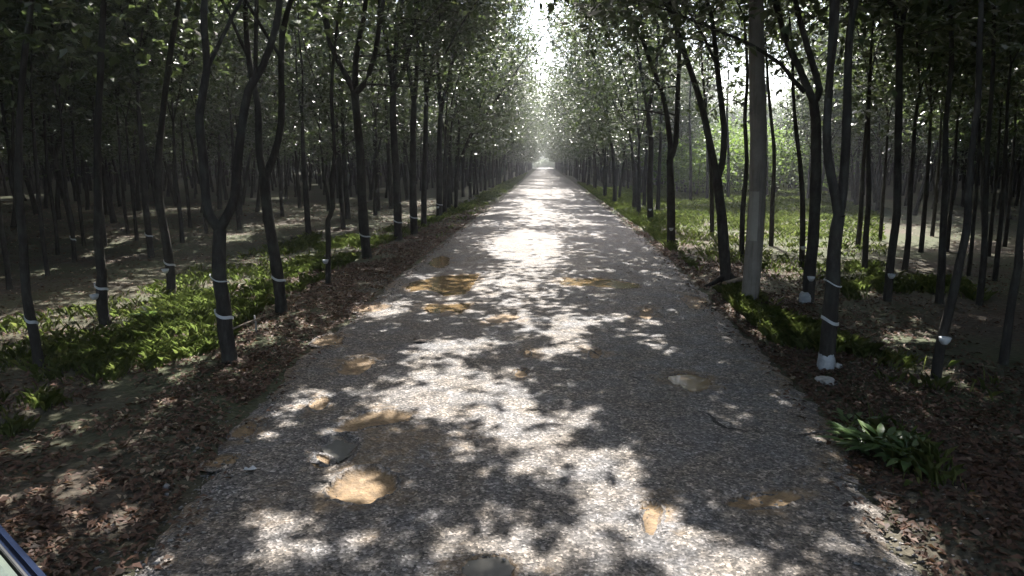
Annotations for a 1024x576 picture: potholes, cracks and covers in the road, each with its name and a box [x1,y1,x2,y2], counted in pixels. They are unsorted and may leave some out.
crack [706,413,748,432]
pothole [322,463,402,506]
pothole [404,272,482,297]
pothole [556,277,642,290]
pothole [419,302,477,314]
pothole [334,355,380,377]
pothole [634,498,667,539]
pothole [482,312,523,324]
pothole [665,372,714,394]
pothole [309,431,365,467]
